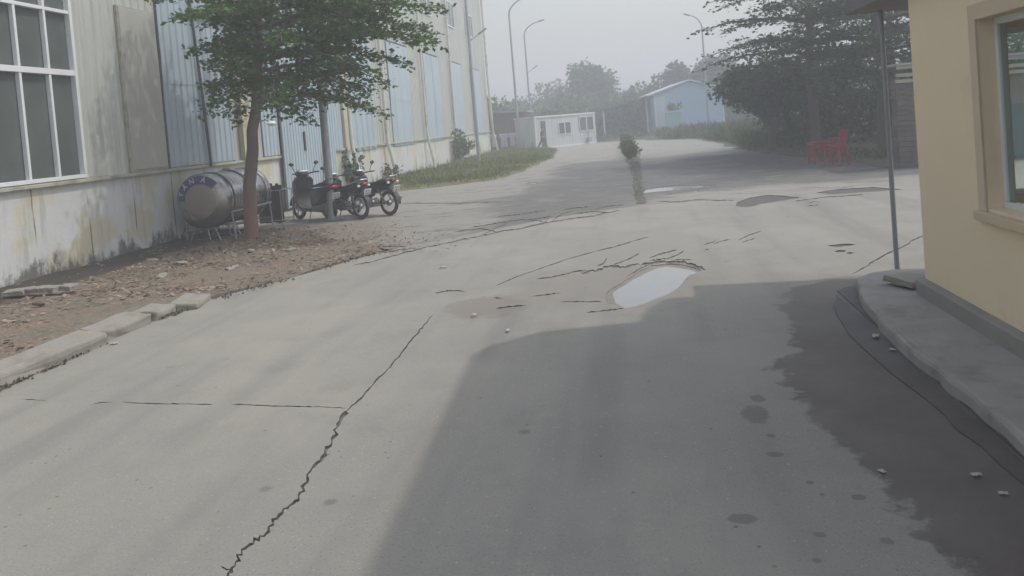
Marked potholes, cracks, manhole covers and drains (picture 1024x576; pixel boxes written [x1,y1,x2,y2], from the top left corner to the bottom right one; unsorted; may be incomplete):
crack [352,205,619,266]
crack [25,316,432,576]
crack [494,231,760,313]
pothole [606,264,702,308]
